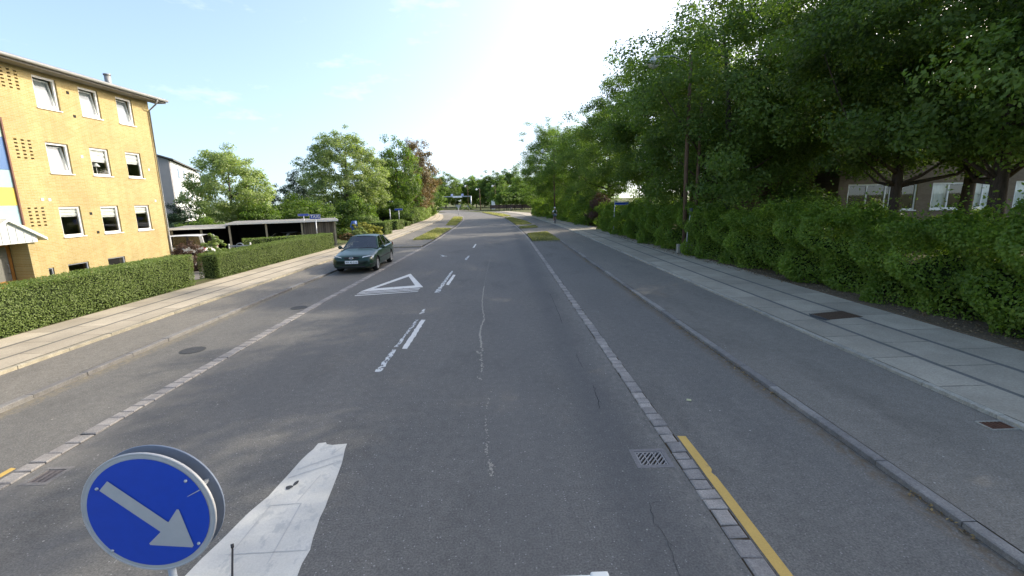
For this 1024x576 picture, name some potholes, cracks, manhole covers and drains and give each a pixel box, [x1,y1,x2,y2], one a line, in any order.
drain grate [628,448,675,468]
manhole cover [813,311,863,320]
crack [476,256,496,476]
manhole cover [179,346,206,354]
drain grate [17,466,75,486]
drain grate [974,420,1020,431]
